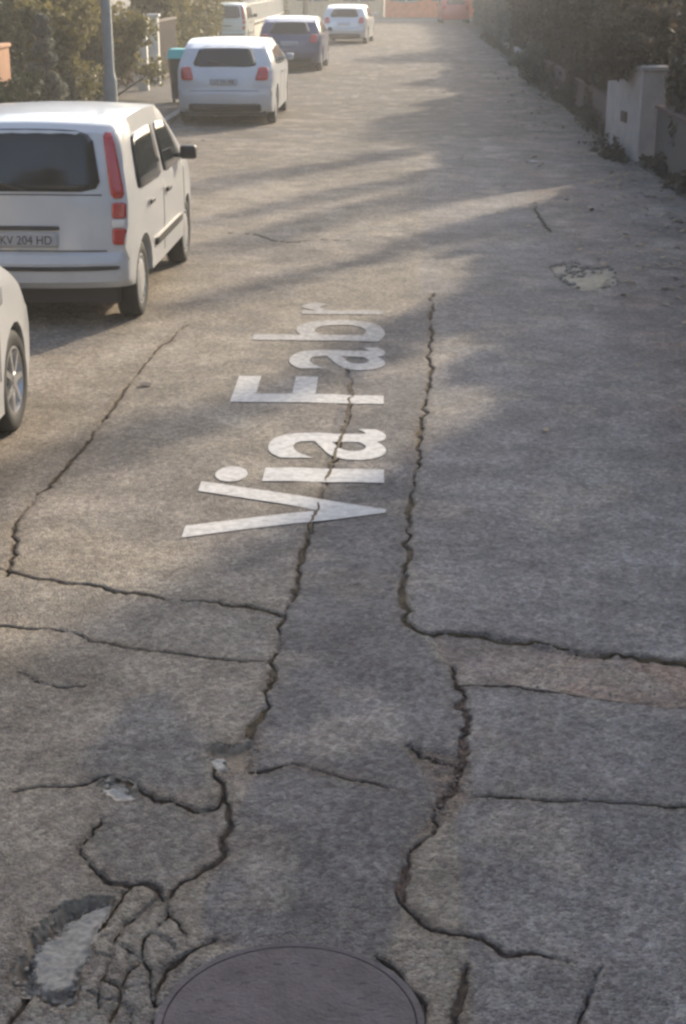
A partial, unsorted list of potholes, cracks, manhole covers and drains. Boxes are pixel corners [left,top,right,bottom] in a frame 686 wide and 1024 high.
crack [0,325,354,740]
crack [376,294,686,1024]
pothole [94,776,141,801]
pothole [9,896,114,1010]
crack [252,234,340,243]
manhole cover [154,943,425,1024]
pothole [551,261,620,291]
crack [13,765,388,1024]
